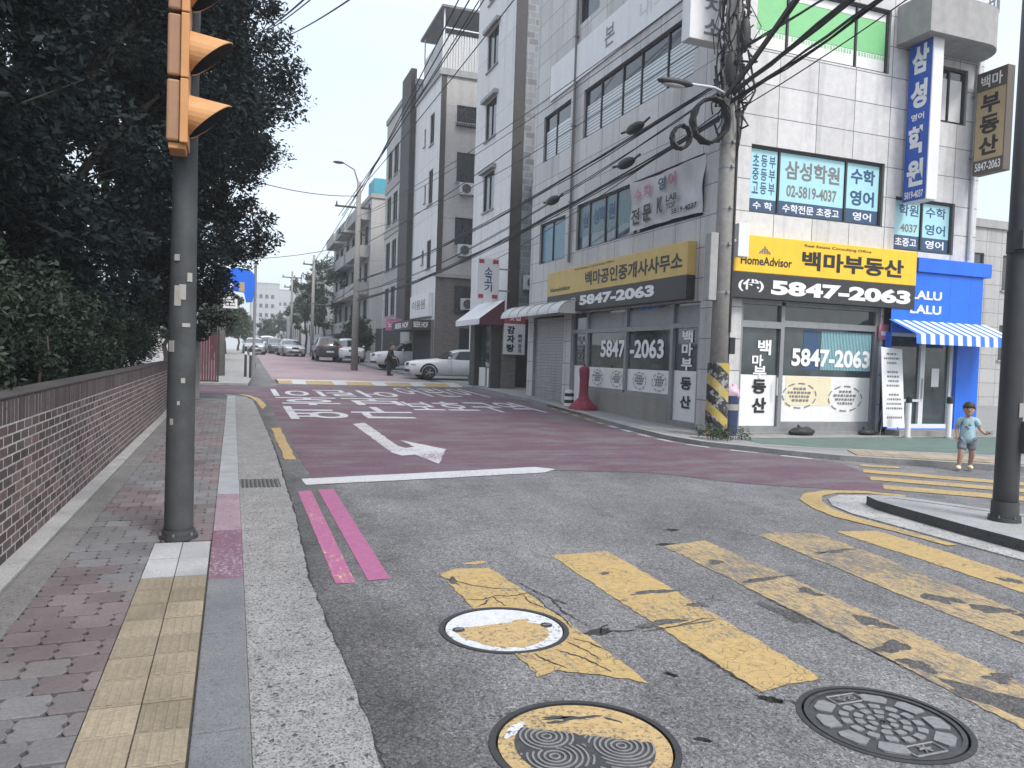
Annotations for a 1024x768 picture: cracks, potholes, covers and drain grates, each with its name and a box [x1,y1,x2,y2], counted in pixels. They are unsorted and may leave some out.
manhole cover [489,700,683,768]
drain grate [239,479,281,488]
crack [458,581,634,671]
manhole cover [796,686,978,765]
manhole cover [439,607,569,654]
